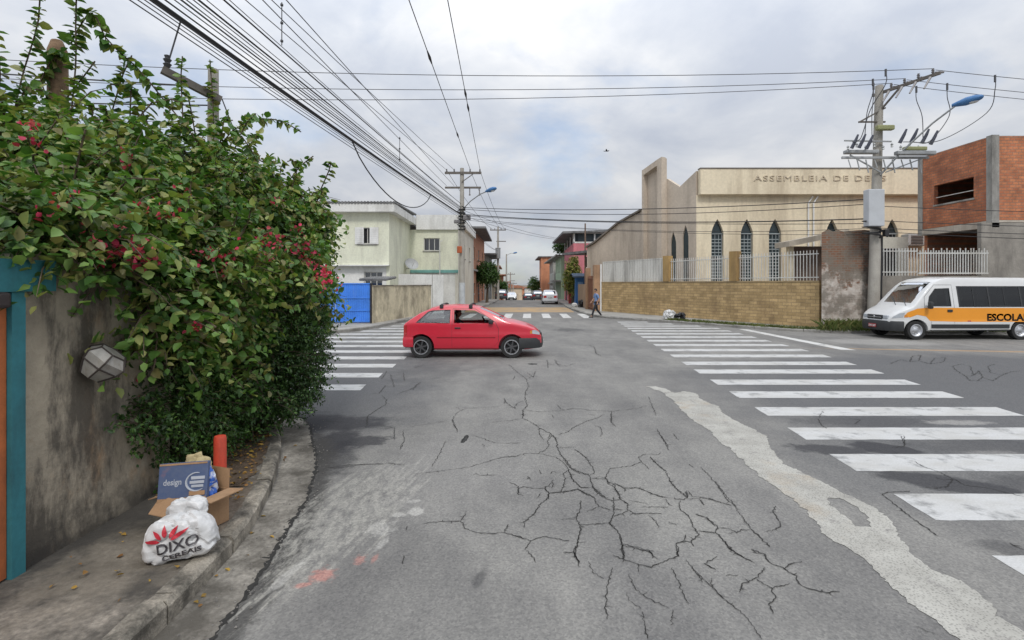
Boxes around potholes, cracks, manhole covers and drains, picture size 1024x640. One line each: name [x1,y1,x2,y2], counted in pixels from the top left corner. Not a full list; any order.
crack [882,491,938,536]
crack [891,355,1014,381]
crack [422,365,840,639]
